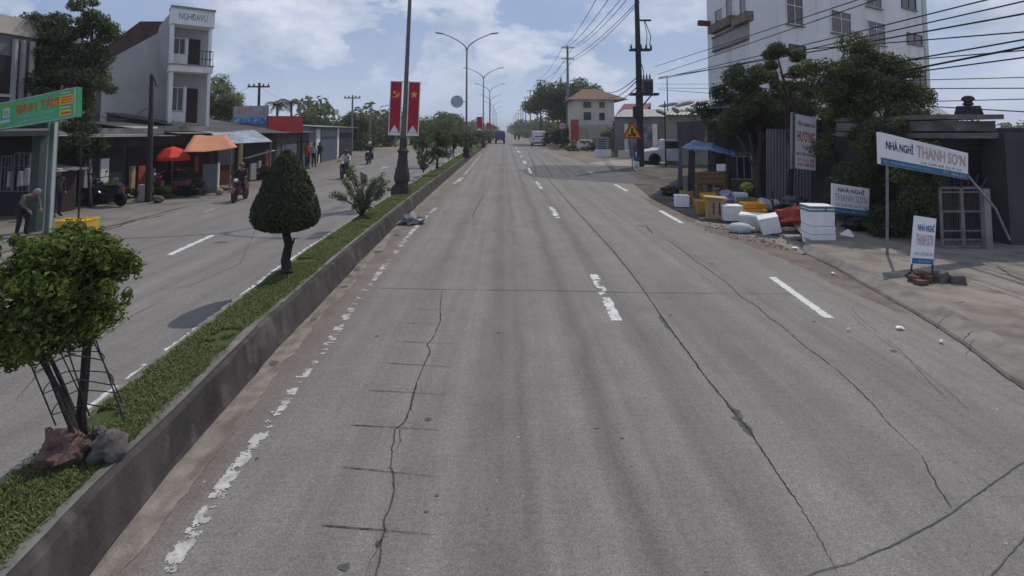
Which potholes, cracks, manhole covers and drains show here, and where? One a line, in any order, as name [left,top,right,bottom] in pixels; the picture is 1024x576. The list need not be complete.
crack [326,295,475,576]
crack [671,242,951,507]
